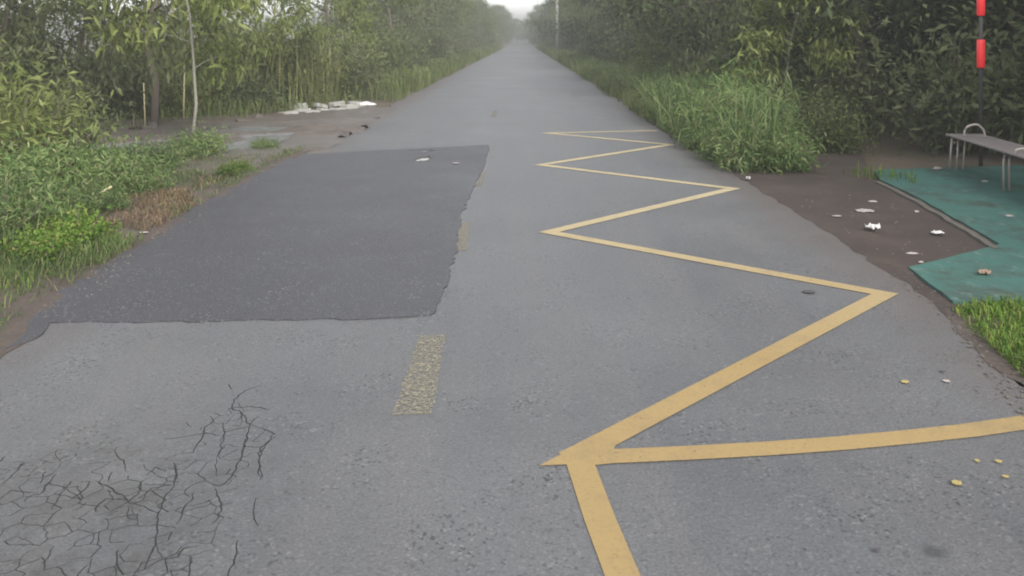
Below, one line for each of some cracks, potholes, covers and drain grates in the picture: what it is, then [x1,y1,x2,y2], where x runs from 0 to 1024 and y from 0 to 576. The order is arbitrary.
crack [0,384,276,576]
